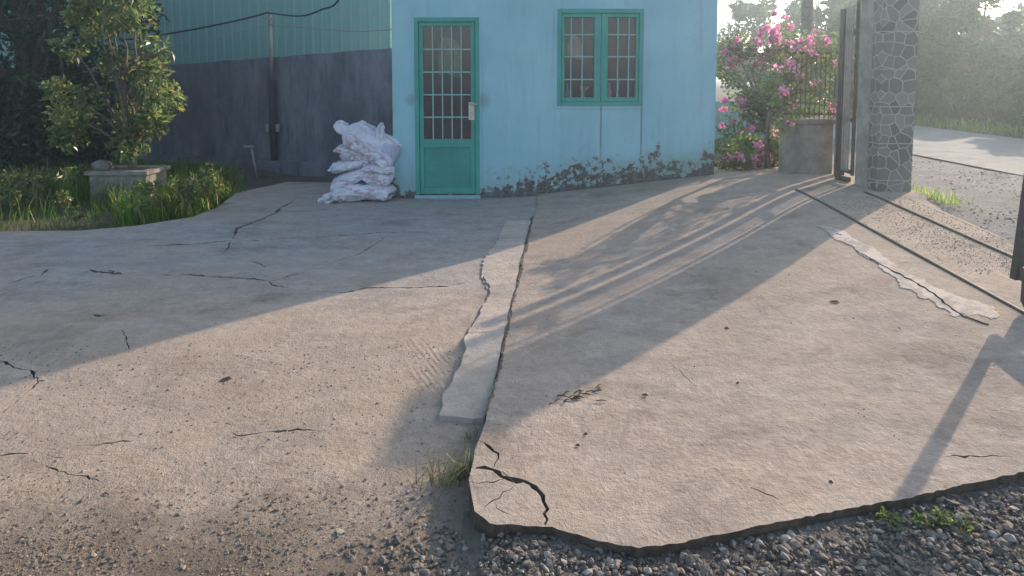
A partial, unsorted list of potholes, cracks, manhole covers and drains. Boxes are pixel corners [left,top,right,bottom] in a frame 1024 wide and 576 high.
crack [3,361,39,413]
crack [464,443,549,525]
crack [83,270,121,284]
crack [162,200,422,288]
crack [2,441,129,481]
crack [466,216,533,425]
